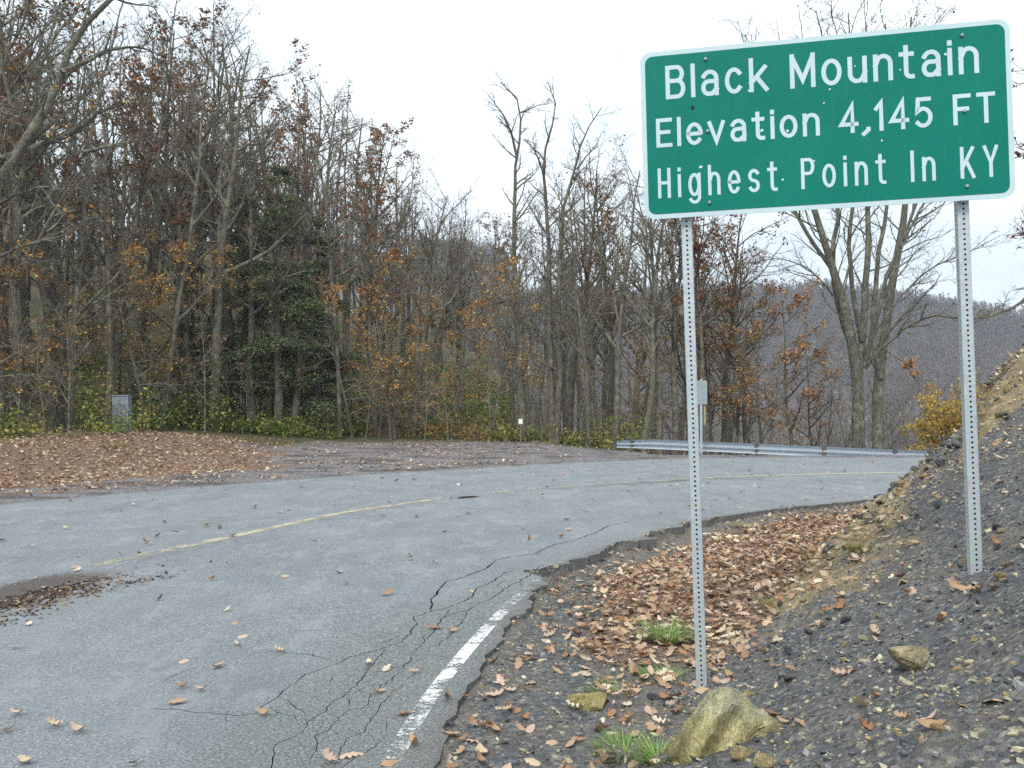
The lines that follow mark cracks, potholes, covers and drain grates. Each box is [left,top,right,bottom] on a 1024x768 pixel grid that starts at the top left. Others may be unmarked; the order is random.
crack [164,508,626,768]
pothole [0,581,90,610]
